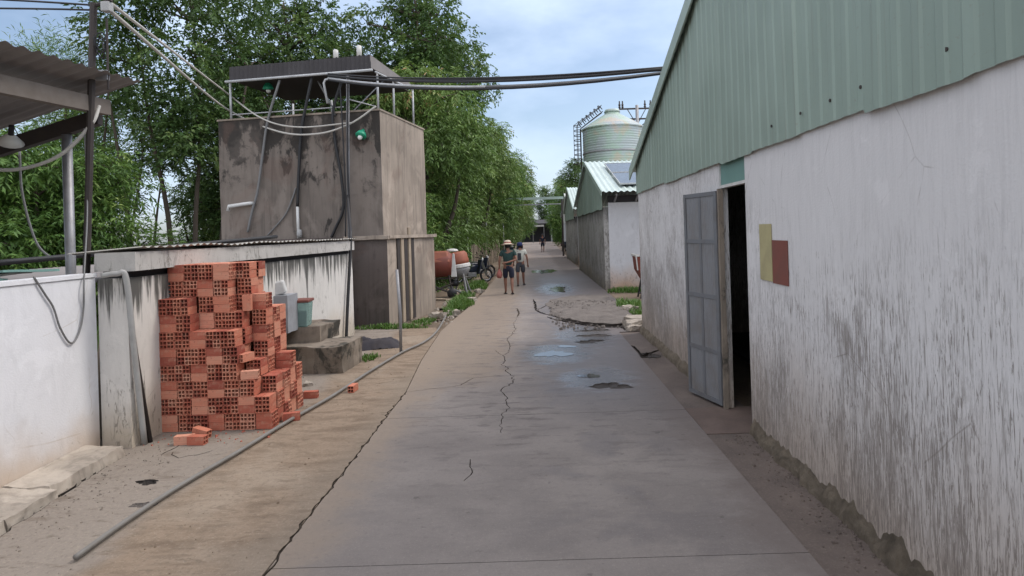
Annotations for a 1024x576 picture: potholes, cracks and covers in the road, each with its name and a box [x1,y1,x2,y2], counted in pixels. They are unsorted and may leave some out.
crack [498,299,659,432]
crack [264,393,406,576]
